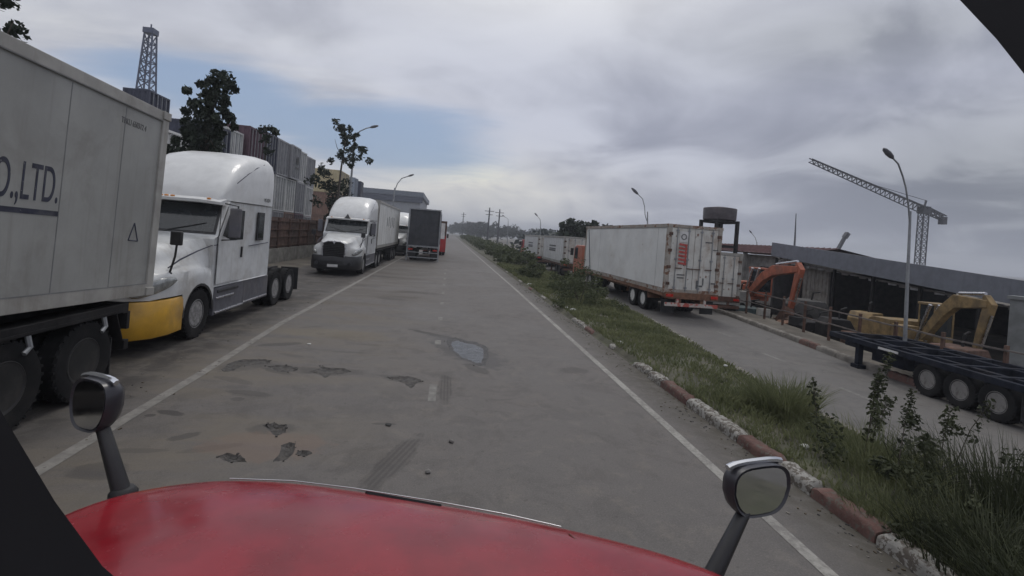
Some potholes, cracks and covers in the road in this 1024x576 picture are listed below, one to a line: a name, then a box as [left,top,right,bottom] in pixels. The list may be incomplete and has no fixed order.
pothole [221,359,272,372]
pothole [265,364,298,372]
pothole [216,453,246,463]
pothole [262,422,288,437]
pothole [273,441,296,462]
pothole [310,365,351,378]
pothole [446,337,488,366]
pothole [387,376,423,388]
